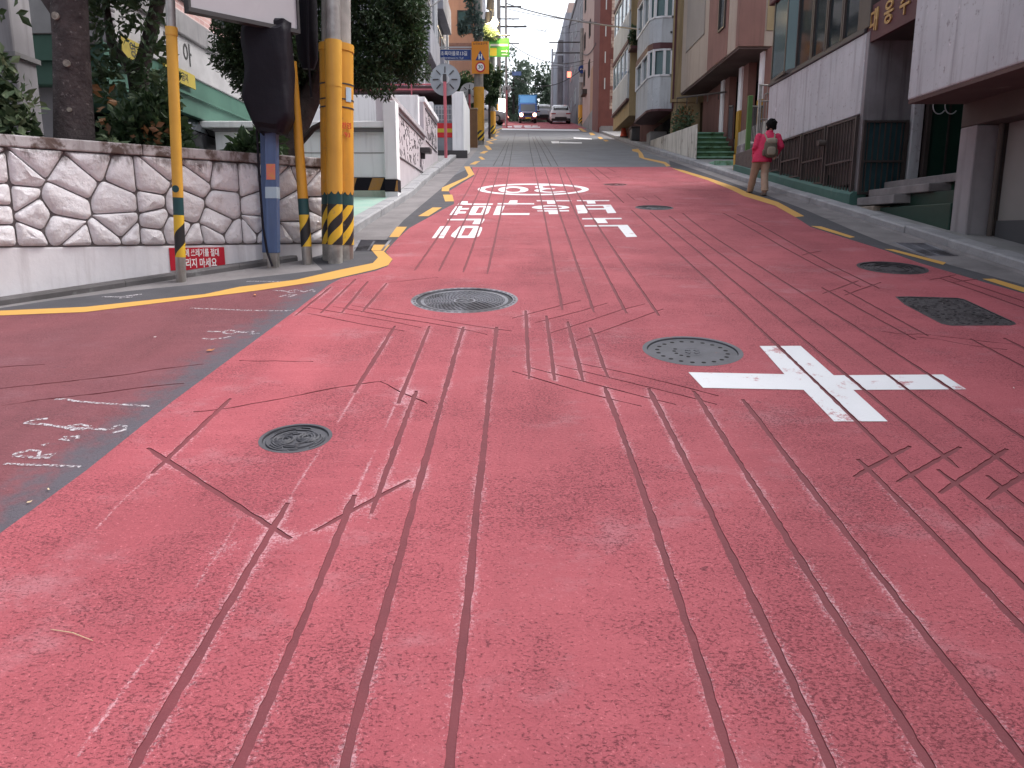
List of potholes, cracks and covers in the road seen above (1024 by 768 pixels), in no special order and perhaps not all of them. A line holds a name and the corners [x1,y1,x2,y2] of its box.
manhole cover [411,287,518,313]
manhole cover [642,336,744,366]
drain grate [354,240,391,252]
manhole cover [258,424,332,453]
manhole cover [856,261,929,275]
drain grate [893,242,958,256]
